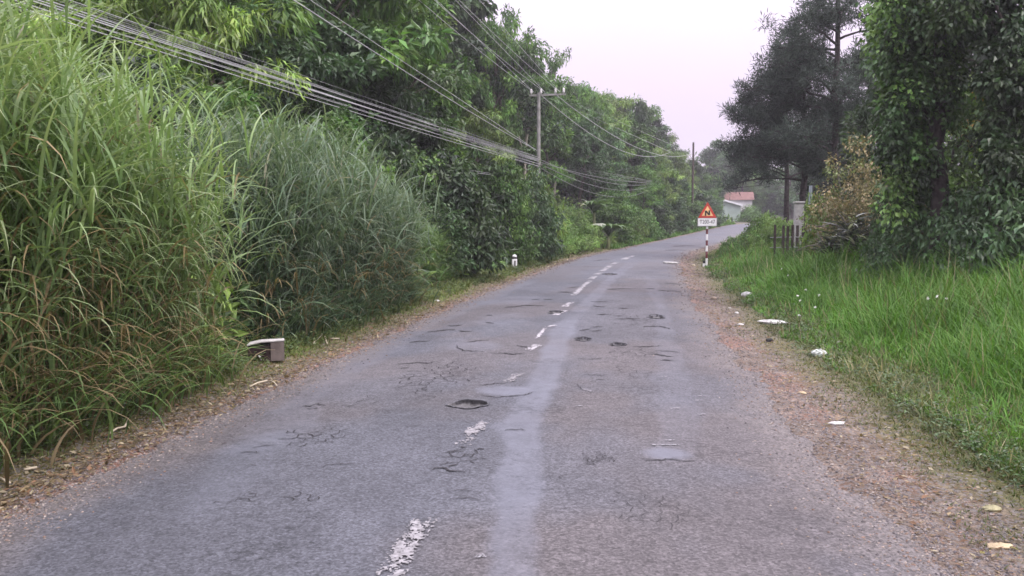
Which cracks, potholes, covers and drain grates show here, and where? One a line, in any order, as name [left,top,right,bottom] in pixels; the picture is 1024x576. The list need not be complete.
crack [614,496,714,528]
crack [241,426,346,467]
crack [432,446,487,472]
crack [398,325,532,399]
pothole [445,399,490,409]
crack [550,451,615,479]
